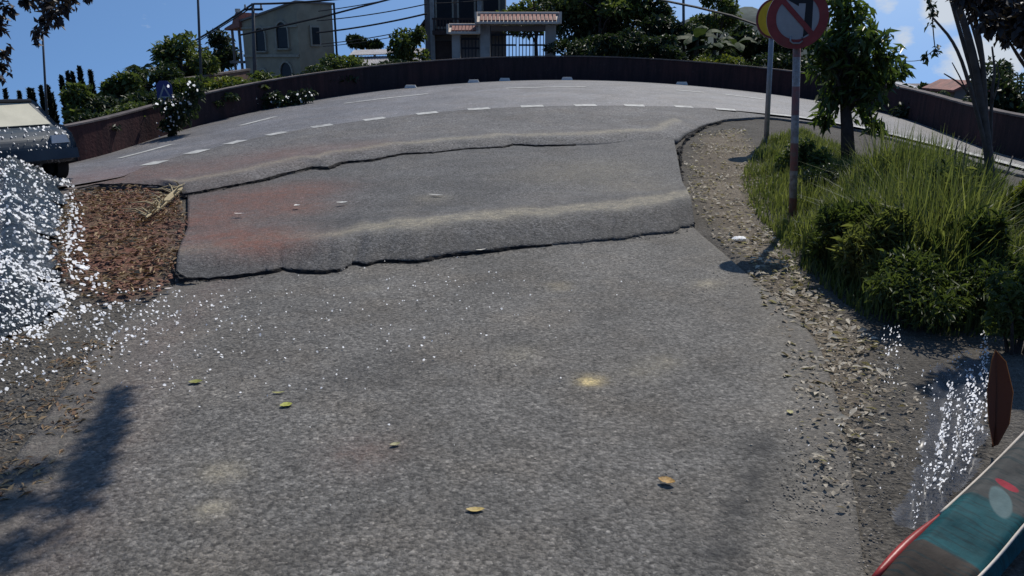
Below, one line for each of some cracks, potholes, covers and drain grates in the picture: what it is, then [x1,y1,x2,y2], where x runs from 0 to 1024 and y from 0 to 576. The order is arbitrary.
crack [172,244,552,281]
crack [184,143,576,195]
